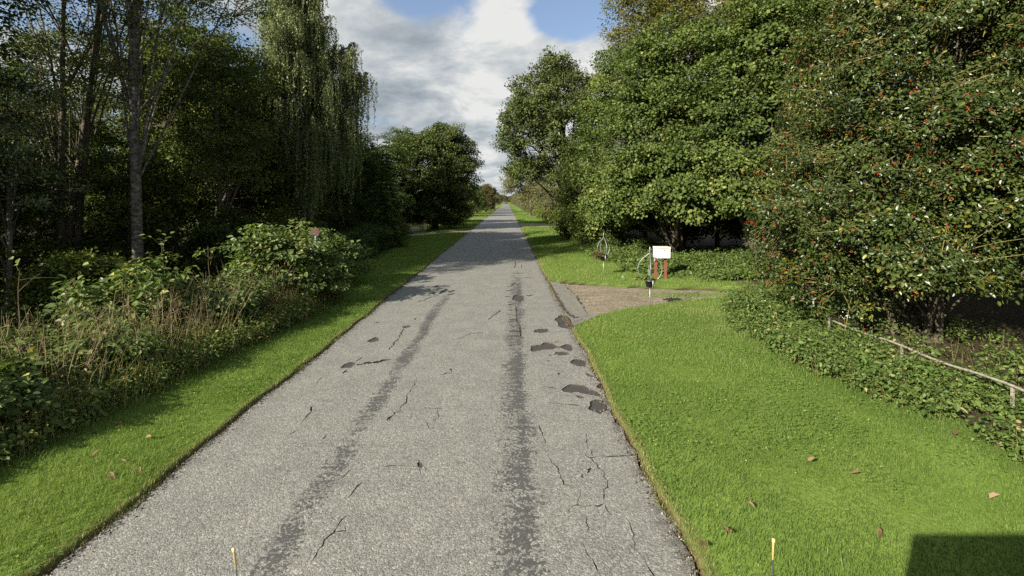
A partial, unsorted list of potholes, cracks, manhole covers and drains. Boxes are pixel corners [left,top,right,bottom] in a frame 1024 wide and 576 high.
pothole [588,399,609,414]
crack [356,329,404,365]
pothole [561,384,600,397]
crack [538,424,635,575]
pothole [530,342,573,352]
crack [393,378,441,428]
crack [309,515,347,567]
pothole [555,315,574,328]
